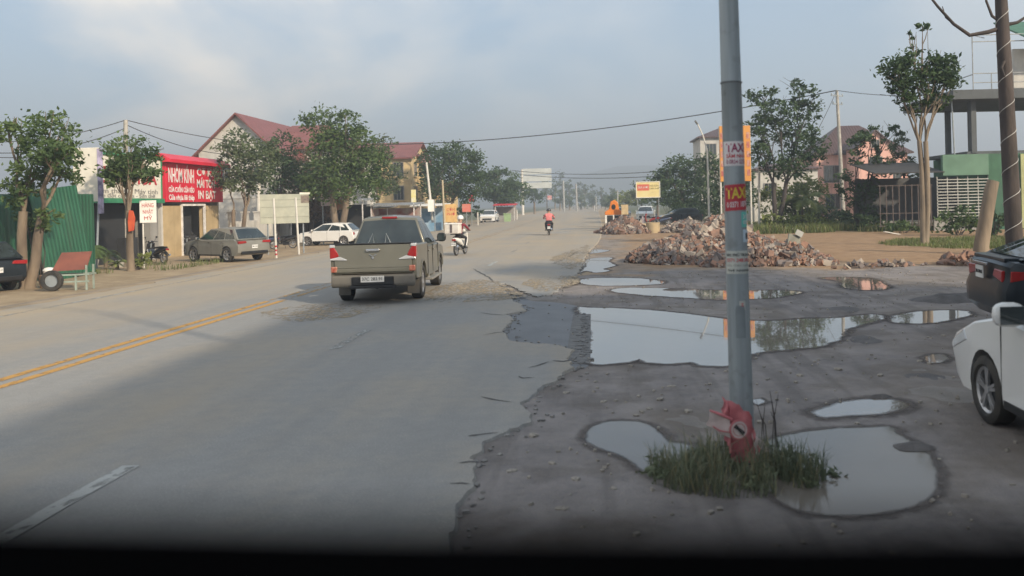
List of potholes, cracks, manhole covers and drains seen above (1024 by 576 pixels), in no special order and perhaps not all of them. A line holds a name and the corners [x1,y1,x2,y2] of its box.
pothole [501,284,594,369]
pothole [919,353,955,364]
pothole [609,287,804,300]
pothole [803,396,919,420]
pothole [884,309,977,324]
pothole [735,425,947,519]
pothole [819,277,894,290]
pothole [581,257,617,273]
pothole [577,277,667,286]
pothole [578,419,700,473]
pothole [573,306,893,368]
